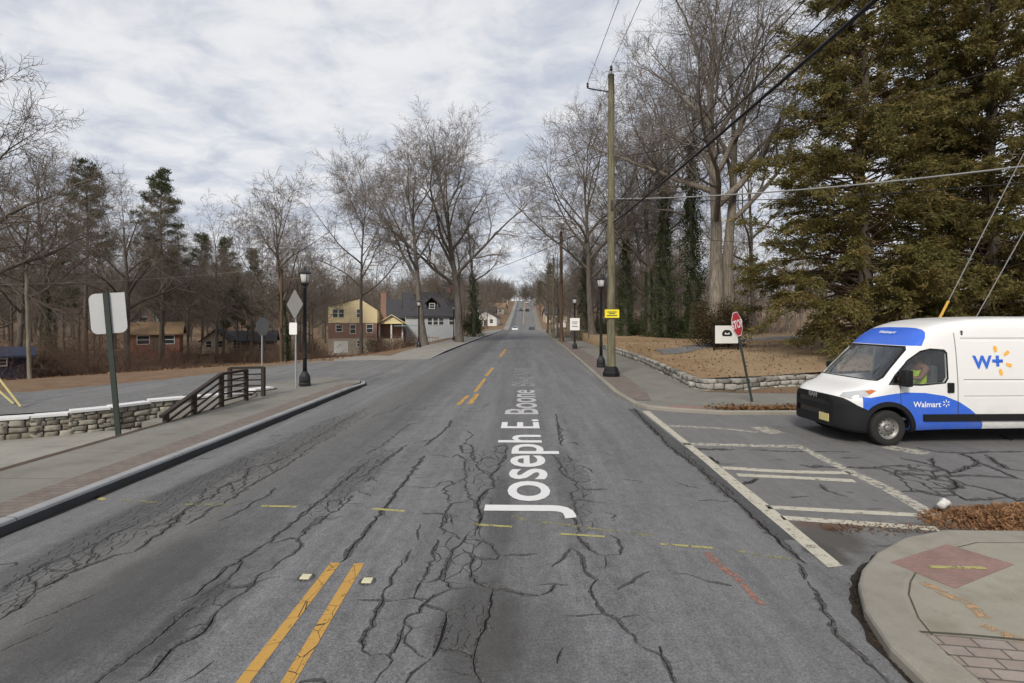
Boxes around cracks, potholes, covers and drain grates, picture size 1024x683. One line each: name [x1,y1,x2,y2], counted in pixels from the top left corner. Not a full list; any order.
crack [0,402,678,683]
